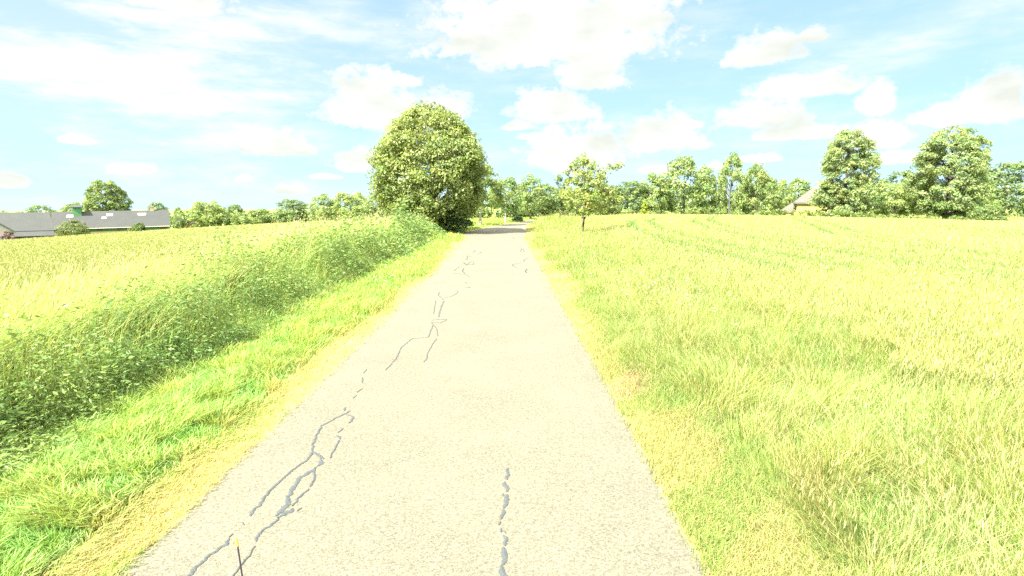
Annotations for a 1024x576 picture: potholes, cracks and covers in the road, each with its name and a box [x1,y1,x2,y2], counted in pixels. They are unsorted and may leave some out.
crack [385,251,480,370]
